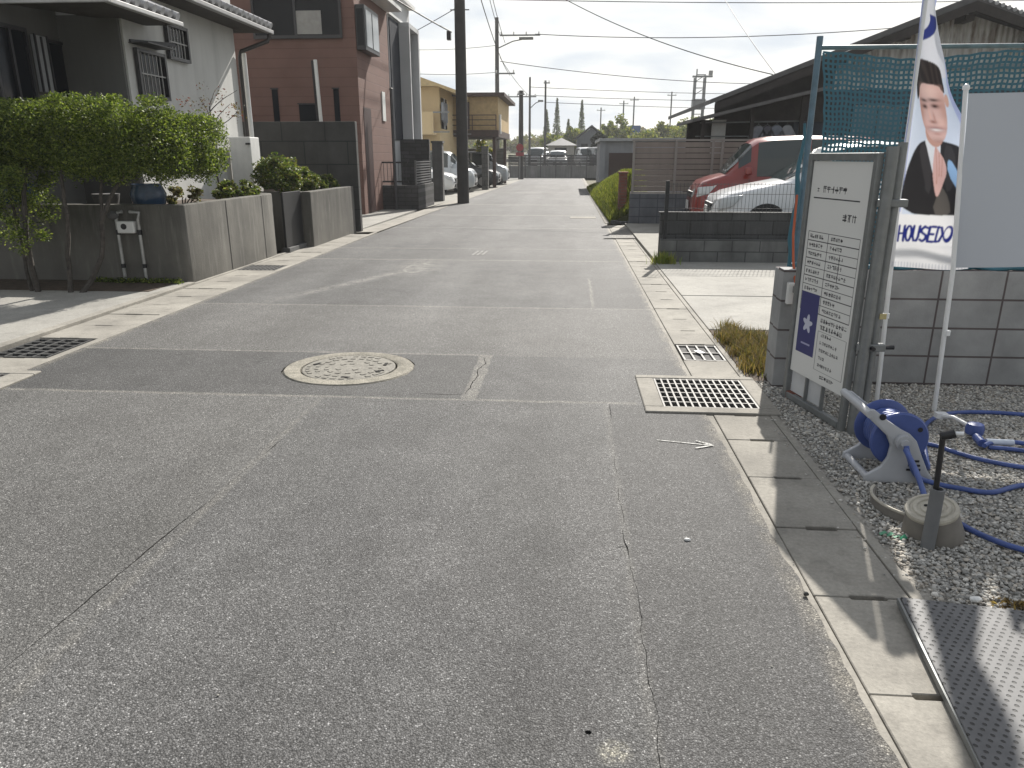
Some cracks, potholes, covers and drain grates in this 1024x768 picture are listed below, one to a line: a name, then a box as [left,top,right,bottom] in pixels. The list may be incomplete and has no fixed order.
drain grate [676,345,726,361]
drain grate [0,339,93,358]
crack [609,404,661,768]
drain grate [635,375,782,417]
manhole cover [282,352,414,386]
